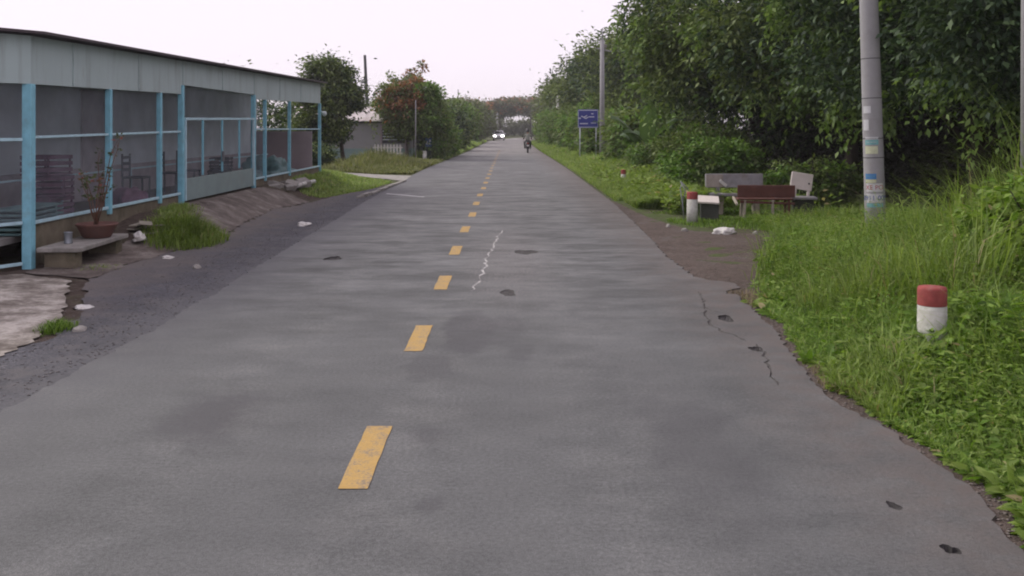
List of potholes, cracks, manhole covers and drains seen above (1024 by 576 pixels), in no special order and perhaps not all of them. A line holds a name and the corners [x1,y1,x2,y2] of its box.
pothole [939,544,962,554]
crack [698,292,779,385]
crack [472,230,503,290]
